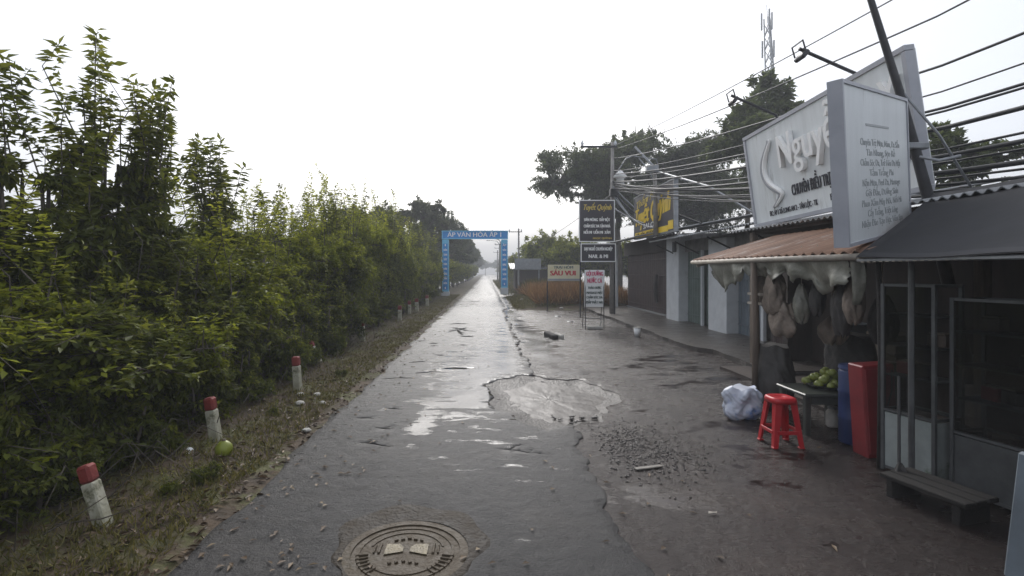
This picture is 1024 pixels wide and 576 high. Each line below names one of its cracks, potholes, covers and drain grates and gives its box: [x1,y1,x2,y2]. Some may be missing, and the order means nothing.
pothole [486,375,622,431]
crack [388,323,471,379]
manhole cover [331,504,491,576]
